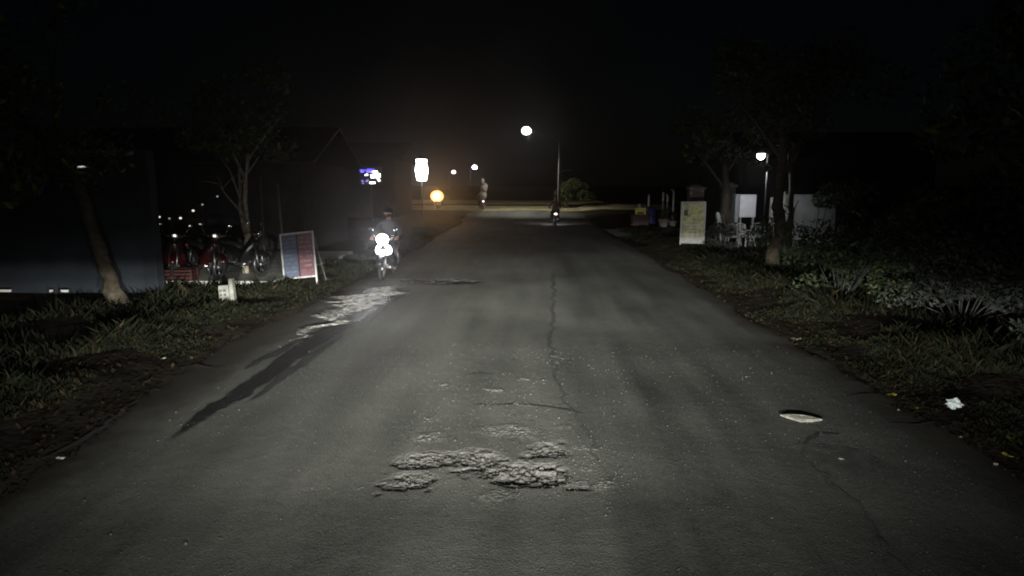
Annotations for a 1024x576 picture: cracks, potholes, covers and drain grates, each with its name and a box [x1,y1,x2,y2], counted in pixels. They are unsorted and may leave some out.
pothole [477,456,590,490]
crack [477,403,581,413]
crack [800,431,906,569]
pothole [444,448,507,479]
pothole [523,441,570,459]
pothole [375,471,436,495]
pothole [391,452,473,469]
